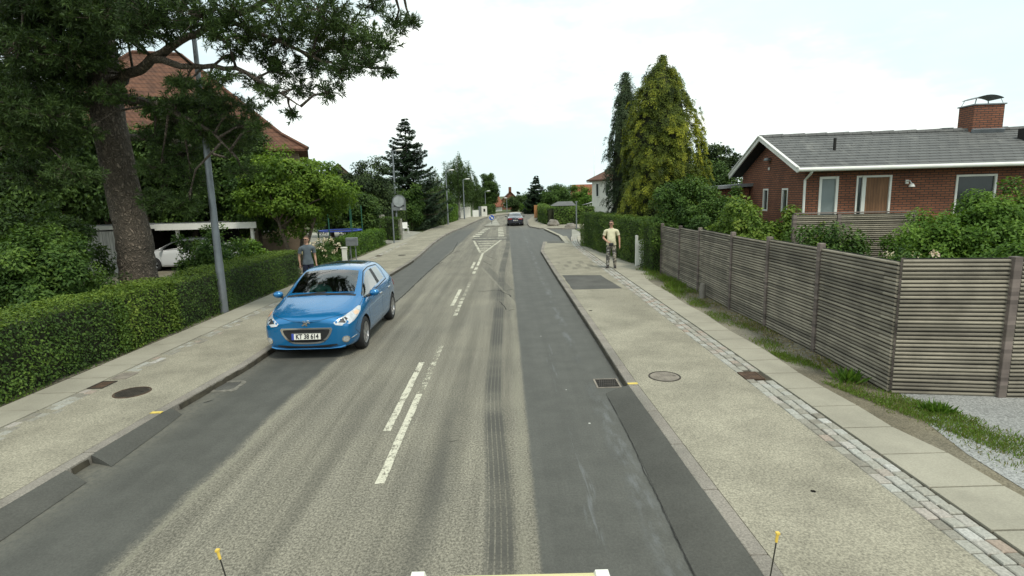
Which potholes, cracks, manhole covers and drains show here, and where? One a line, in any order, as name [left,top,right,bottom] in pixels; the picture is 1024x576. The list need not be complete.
manhole cover [648,371,681,382]
manhole cover [112,386,152,399]
utility cover [86,381,117,389]
utility cover [737,371,765,380]
drain grate [593,378,622,388]
